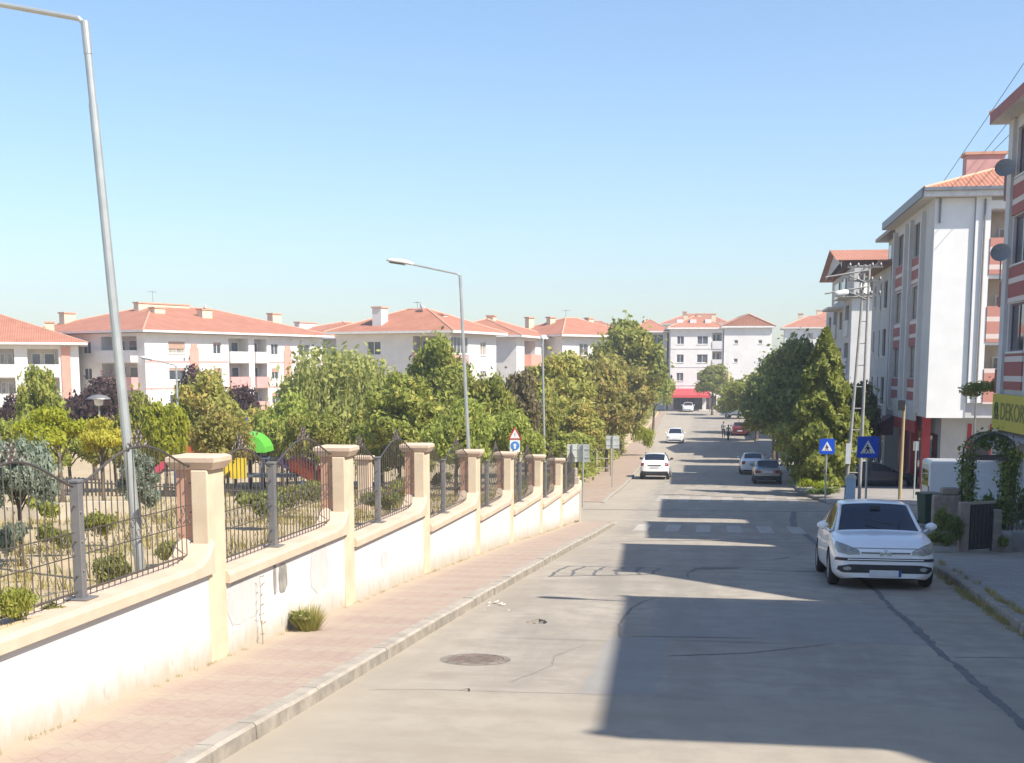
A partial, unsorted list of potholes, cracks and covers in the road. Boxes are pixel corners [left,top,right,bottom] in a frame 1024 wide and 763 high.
manhole cover [440,653,511,665]
